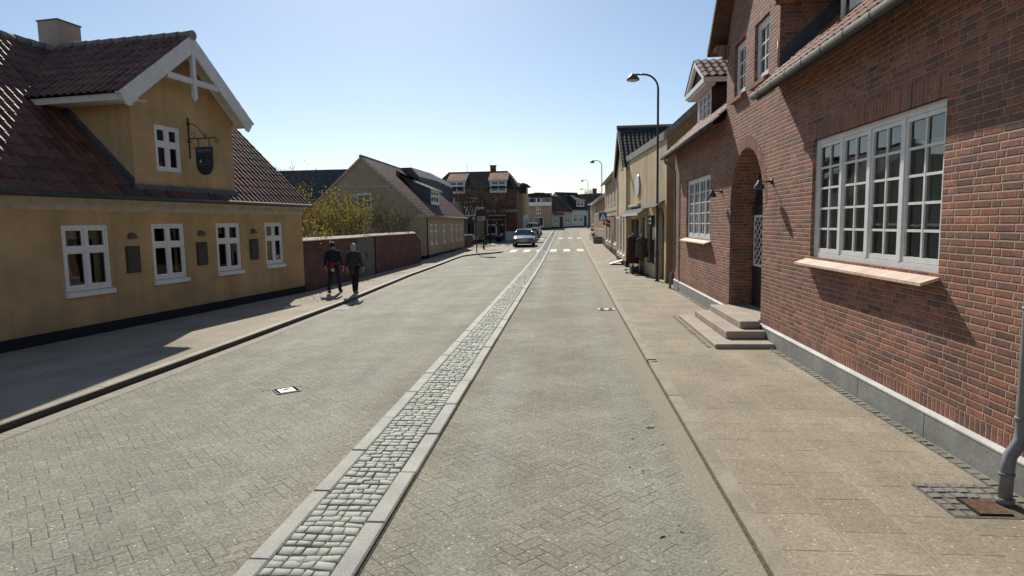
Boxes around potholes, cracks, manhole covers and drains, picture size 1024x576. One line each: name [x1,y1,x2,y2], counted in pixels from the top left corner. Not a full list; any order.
manhole cover [261,386,302,395]
